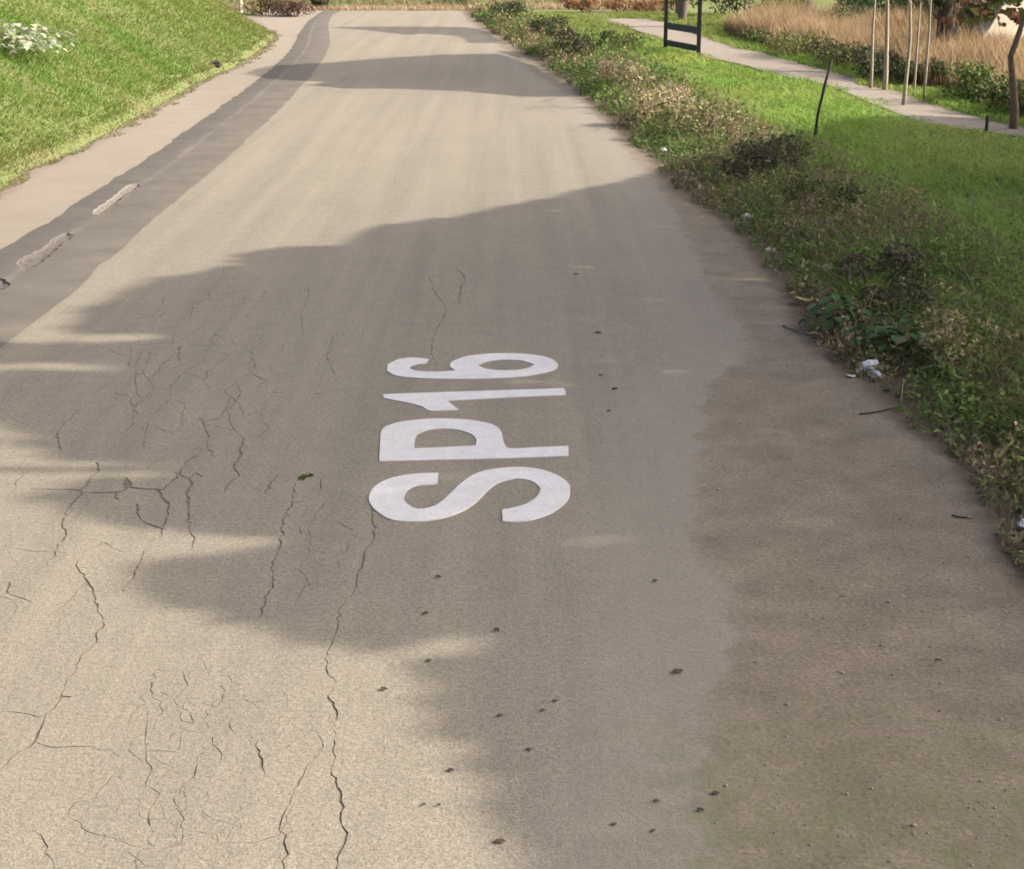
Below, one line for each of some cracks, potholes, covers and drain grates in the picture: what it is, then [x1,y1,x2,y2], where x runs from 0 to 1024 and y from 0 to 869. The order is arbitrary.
crack [0,288,376,869]
crack [428,270,466,360]
